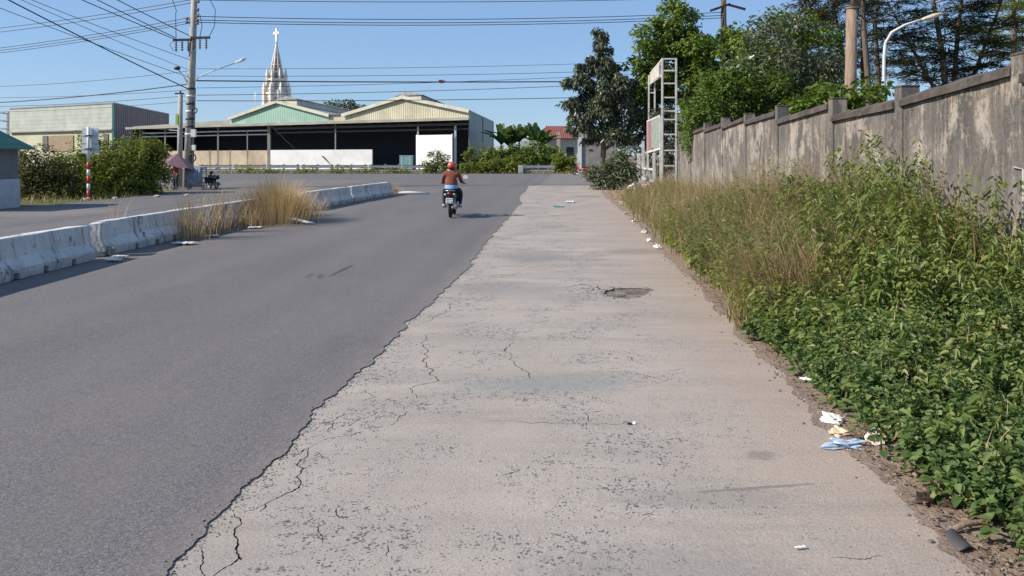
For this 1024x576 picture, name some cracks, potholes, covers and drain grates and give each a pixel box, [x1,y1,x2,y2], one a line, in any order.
pothole [600,287,653,299]
crack [200,307,483,576]
